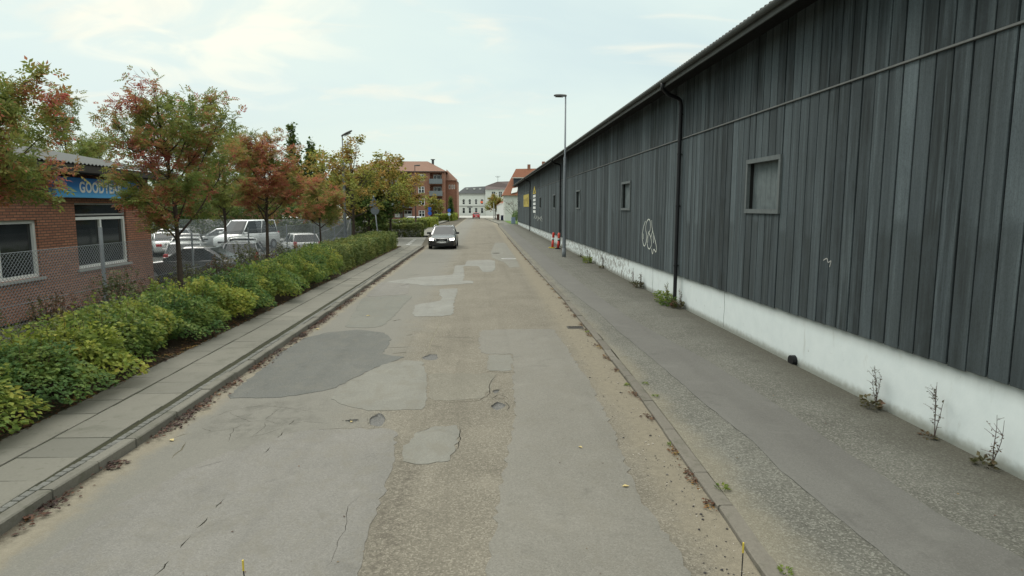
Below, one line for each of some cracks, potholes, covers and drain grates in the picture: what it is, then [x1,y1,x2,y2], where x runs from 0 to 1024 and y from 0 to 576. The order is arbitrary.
pothole [367,411,386,428]
crack [203,406,381,452]
